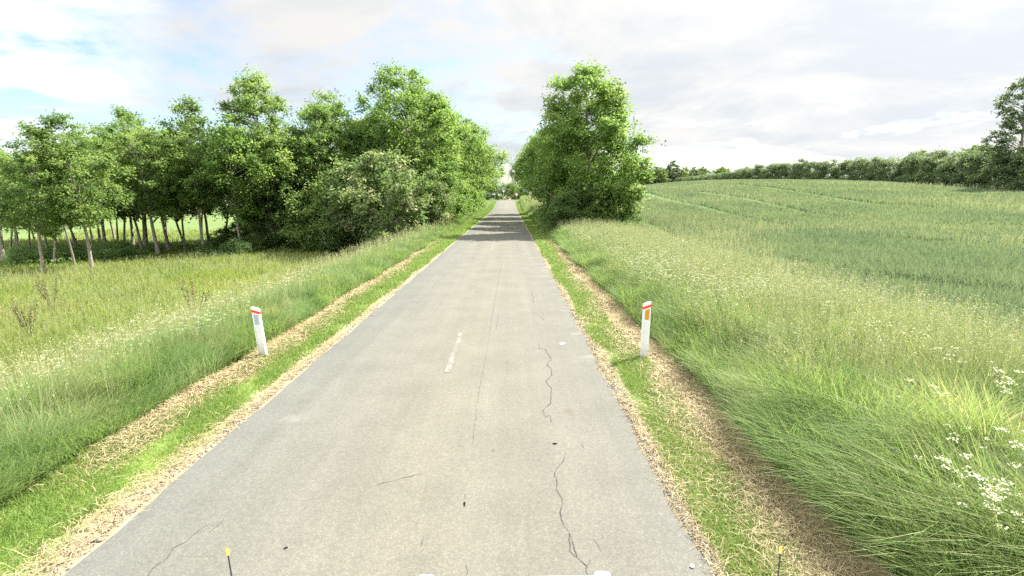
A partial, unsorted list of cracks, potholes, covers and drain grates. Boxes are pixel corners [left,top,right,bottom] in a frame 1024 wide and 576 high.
crack [536,343,553,423]
crack [554,456,601,576]
